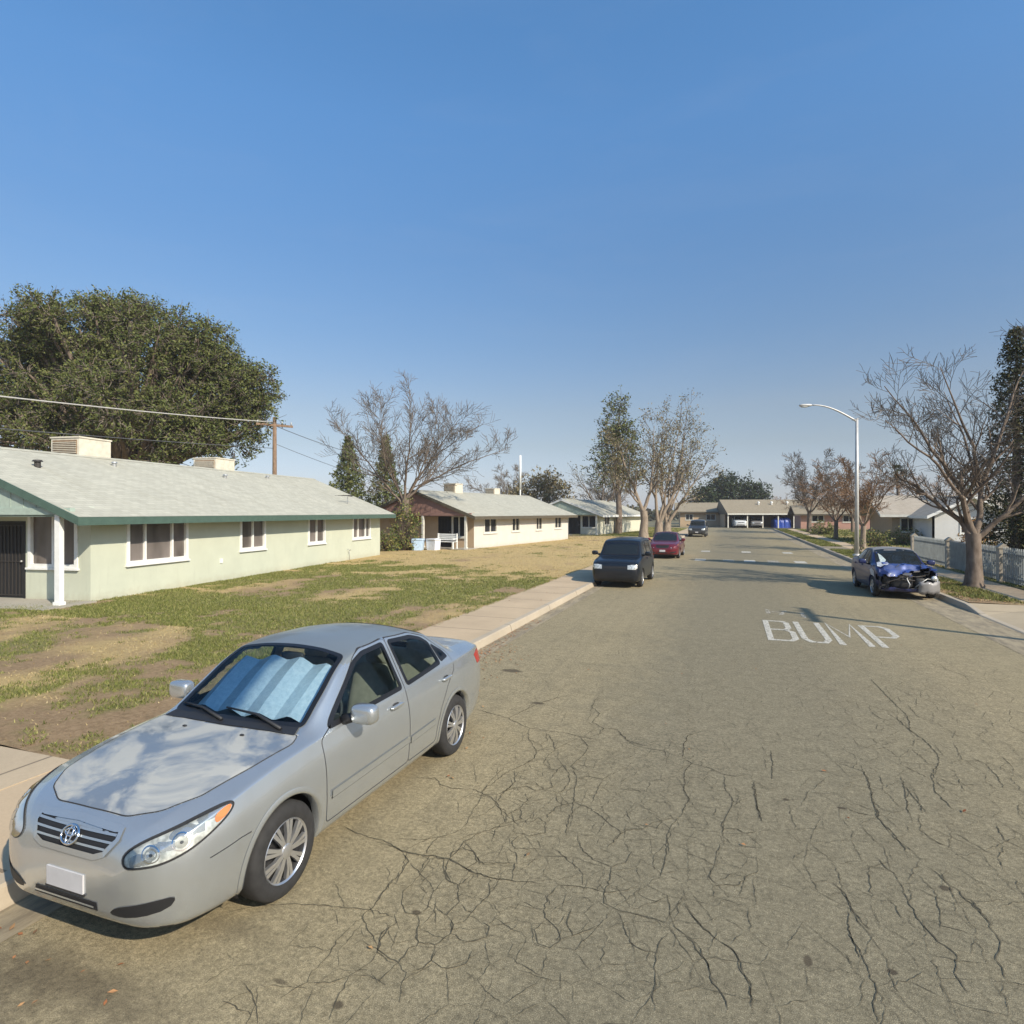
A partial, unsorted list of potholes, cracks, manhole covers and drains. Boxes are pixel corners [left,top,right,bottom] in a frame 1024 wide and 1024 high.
crack [179,634,1024,1024]
